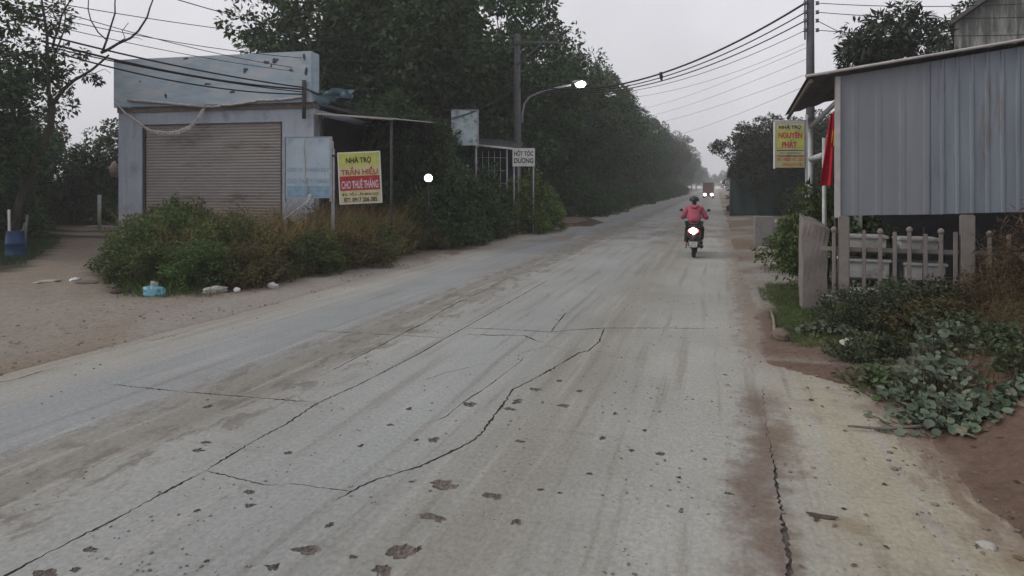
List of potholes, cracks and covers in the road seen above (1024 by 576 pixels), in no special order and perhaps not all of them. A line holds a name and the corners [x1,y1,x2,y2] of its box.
pothole [429,479,457,490]
pothole [370,564,392,576]
crack [762,387,794,576]
pothole [419,512,447,523]
crack [3,276,704,576]
pothole [385,543,417,559]
pothole [290,545,321,556]
